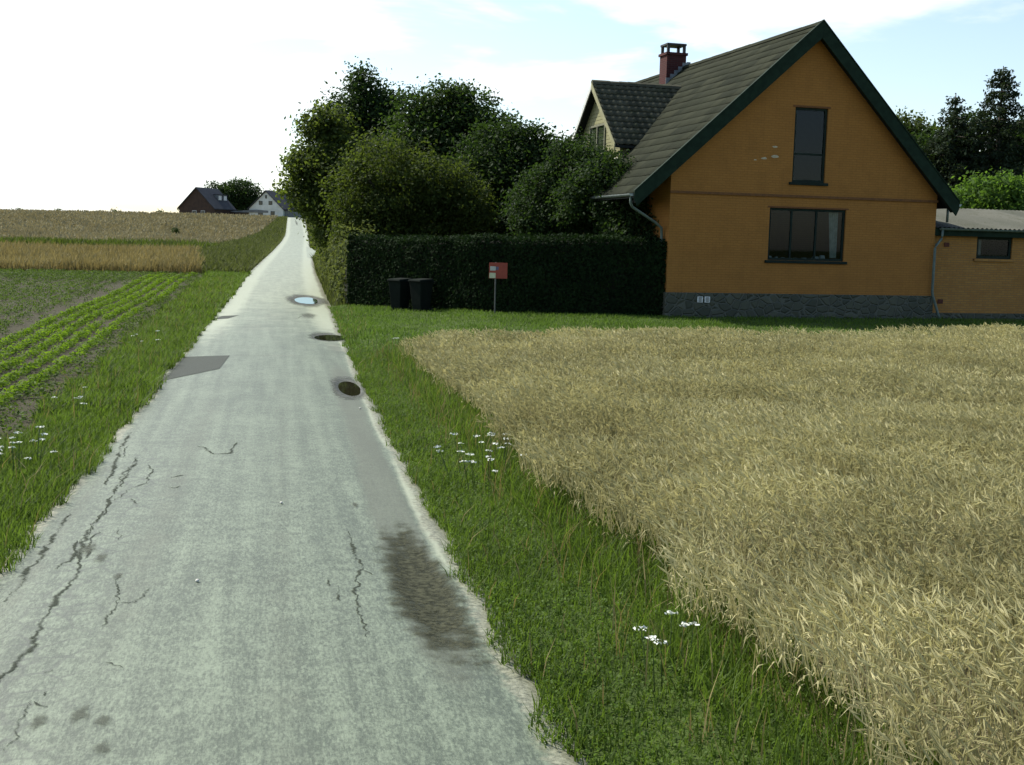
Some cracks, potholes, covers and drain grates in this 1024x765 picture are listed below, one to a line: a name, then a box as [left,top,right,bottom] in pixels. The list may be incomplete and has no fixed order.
pothole [288,295,327,307]
pothole [308,333,343,341]
pothole [331,378,364,400]
crack [327,531,372,637]
crack [0,432,154,678]
